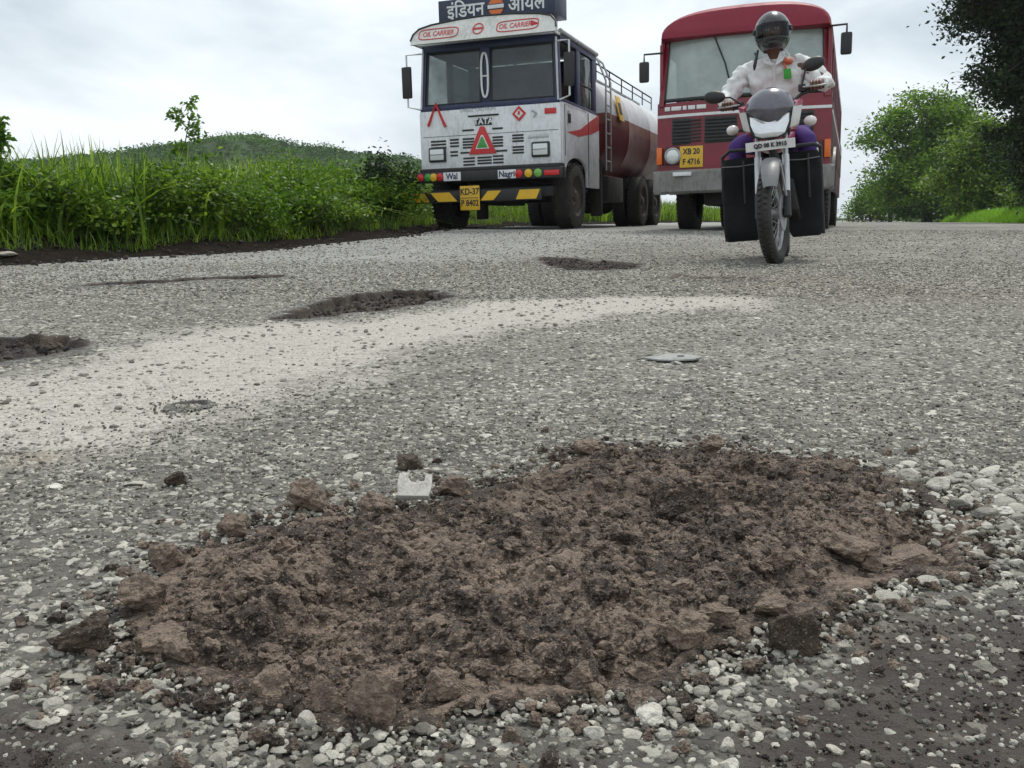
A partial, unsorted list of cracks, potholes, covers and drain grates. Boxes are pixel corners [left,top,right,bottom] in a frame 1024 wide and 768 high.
pothole [0,333,99,368]
pothole [534,257,650,272]
pothole [264,289,462,322]
pothole [163,399,215,413]
